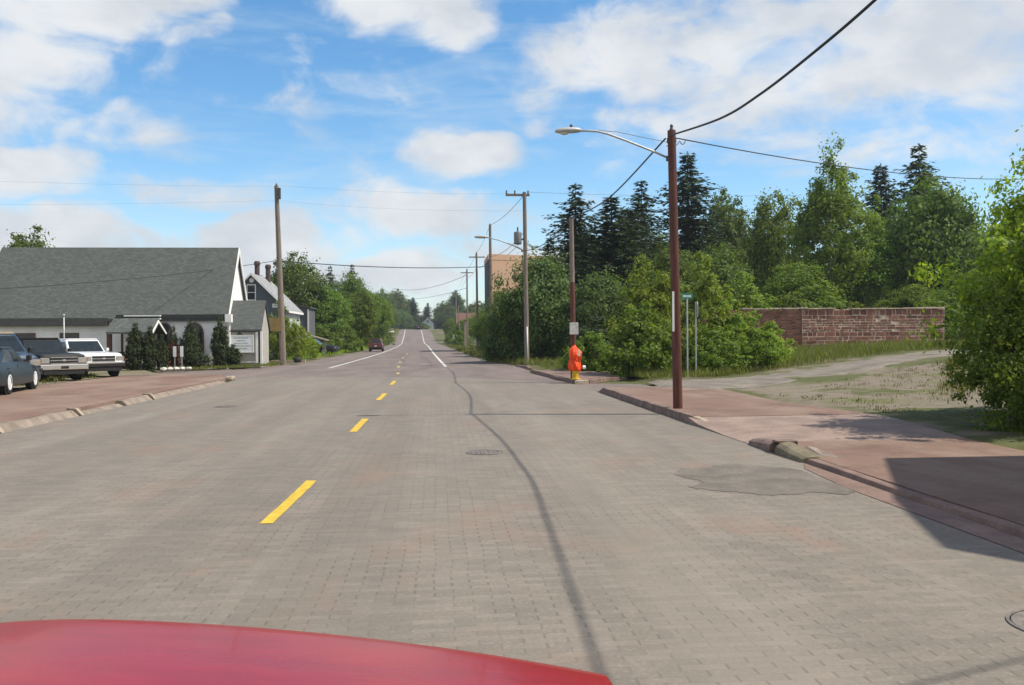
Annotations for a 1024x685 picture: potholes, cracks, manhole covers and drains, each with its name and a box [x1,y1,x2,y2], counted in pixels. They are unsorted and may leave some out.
drain grate [748,438,840,463]
manhole cover [1006,609,1024,631]
